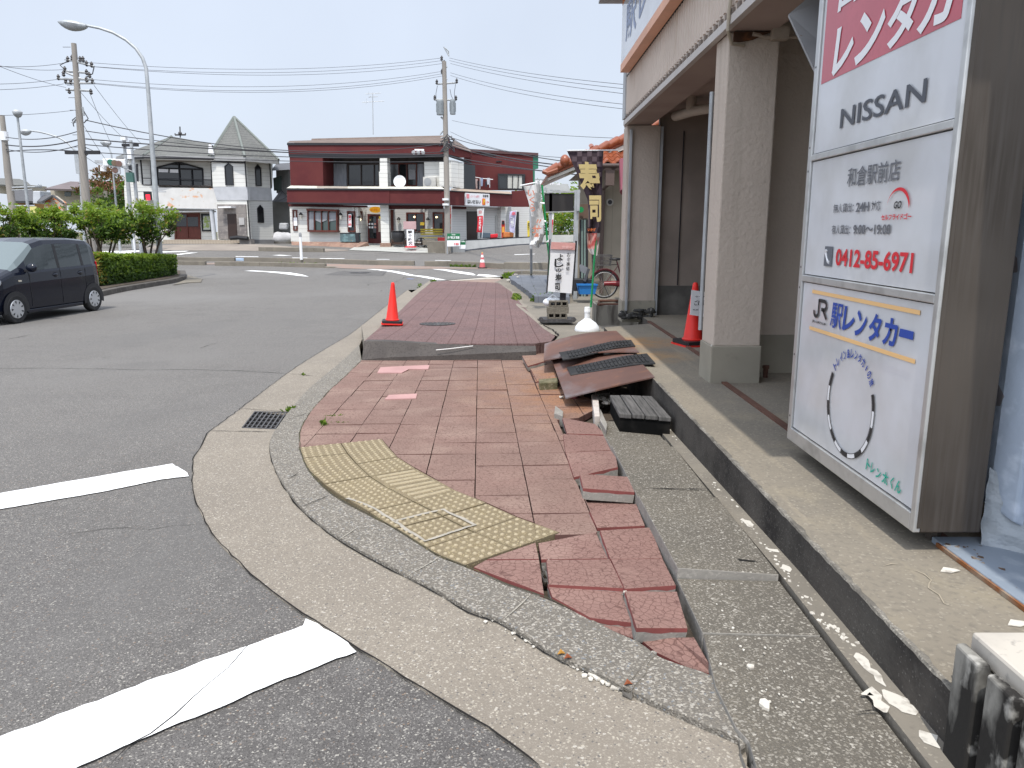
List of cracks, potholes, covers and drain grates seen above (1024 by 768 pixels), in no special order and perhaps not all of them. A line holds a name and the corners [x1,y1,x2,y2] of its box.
crack [114,645,248,760]
drain grate [242,411,288,429]
